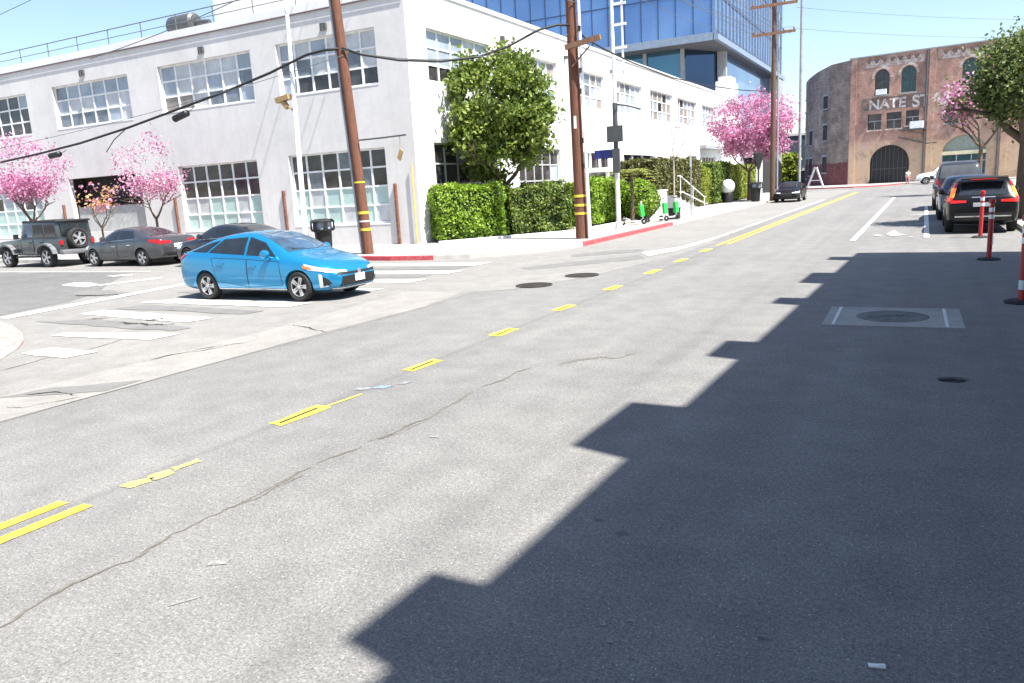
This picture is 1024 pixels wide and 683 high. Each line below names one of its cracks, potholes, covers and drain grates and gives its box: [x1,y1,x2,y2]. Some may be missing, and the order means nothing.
crack [0,368,529,627]
crack [558,353,635,366]
